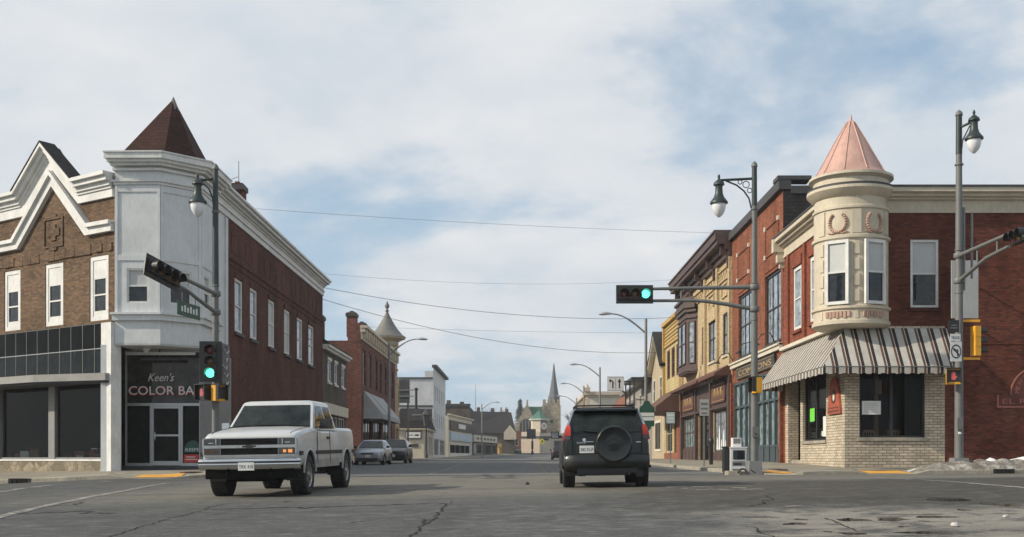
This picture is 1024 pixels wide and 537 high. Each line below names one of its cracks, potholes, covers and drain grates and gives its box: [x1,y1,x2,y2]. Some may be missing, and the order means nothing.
crack [109,501,453,537]
